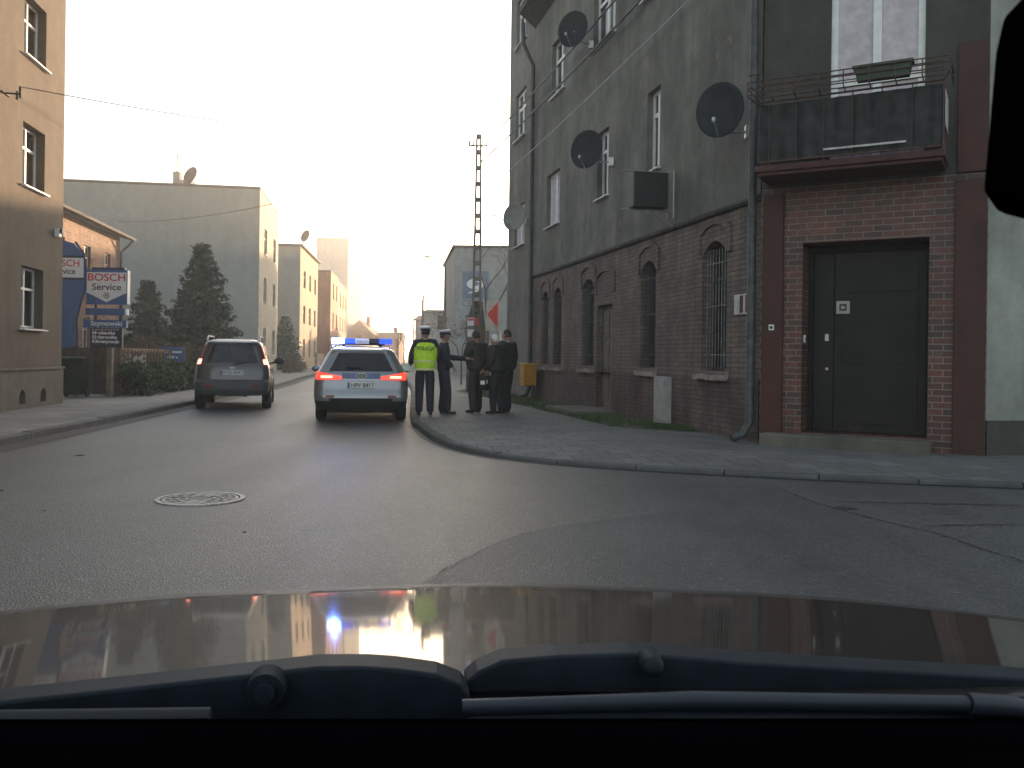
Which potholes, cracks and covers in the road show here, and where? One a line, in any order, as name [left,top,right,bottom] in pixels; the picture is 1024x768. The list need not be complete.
manhole cover [154,492,245,507]
crack [785,490,1024,562]
